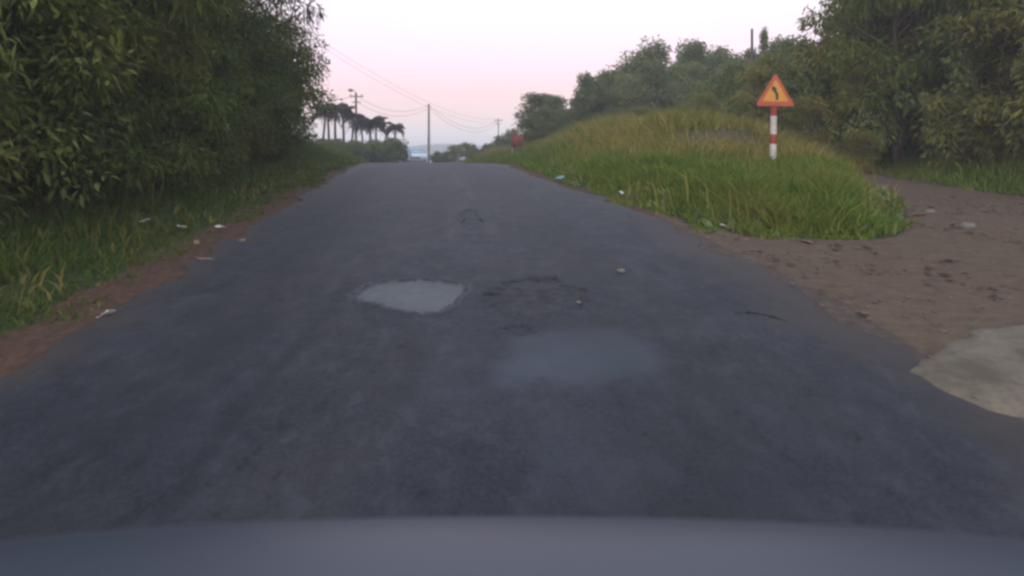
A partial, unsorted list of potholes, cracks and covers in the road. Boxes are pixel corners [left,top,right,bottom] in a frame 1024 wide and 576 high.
pothole [456,209,486,229]
pothole [475,274,599,321]
crack [734,311,788,322]
pothole [345,276,473,316]
